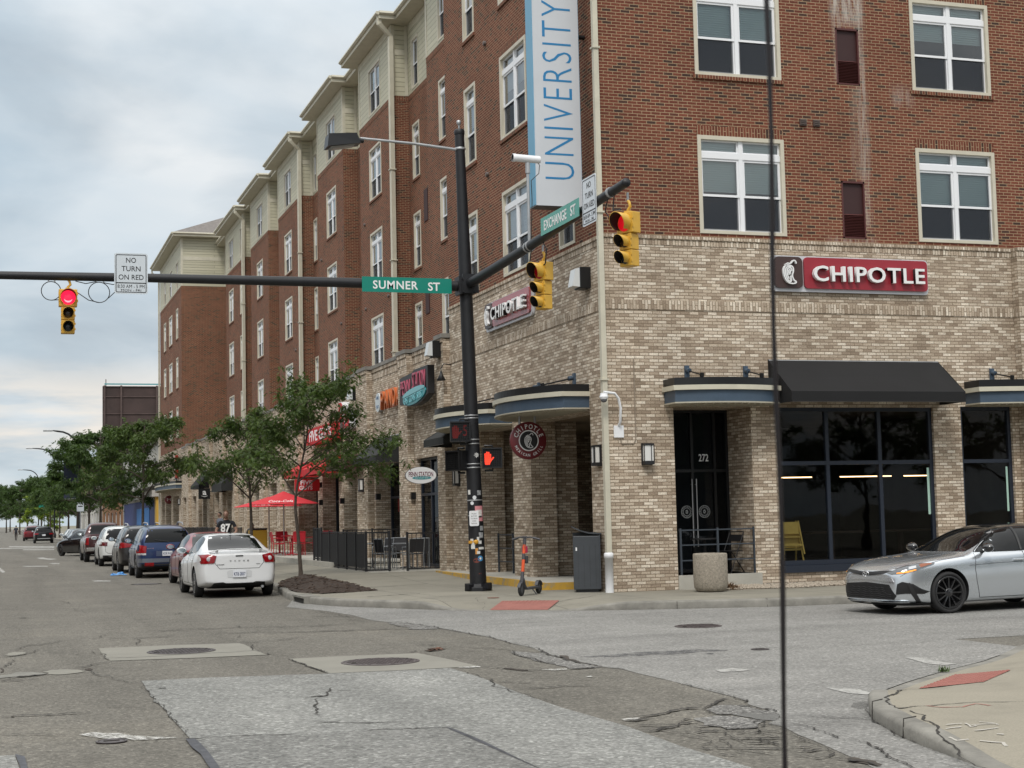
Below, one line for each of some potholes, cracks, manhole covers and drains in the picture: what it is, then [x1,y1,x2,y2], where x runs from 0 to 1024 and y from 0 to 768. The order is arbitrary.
crack [310,688,373,723]
crack [0,640,61,681]
crack [630,695,916,768]
manhole cover [341,657,420,666]
